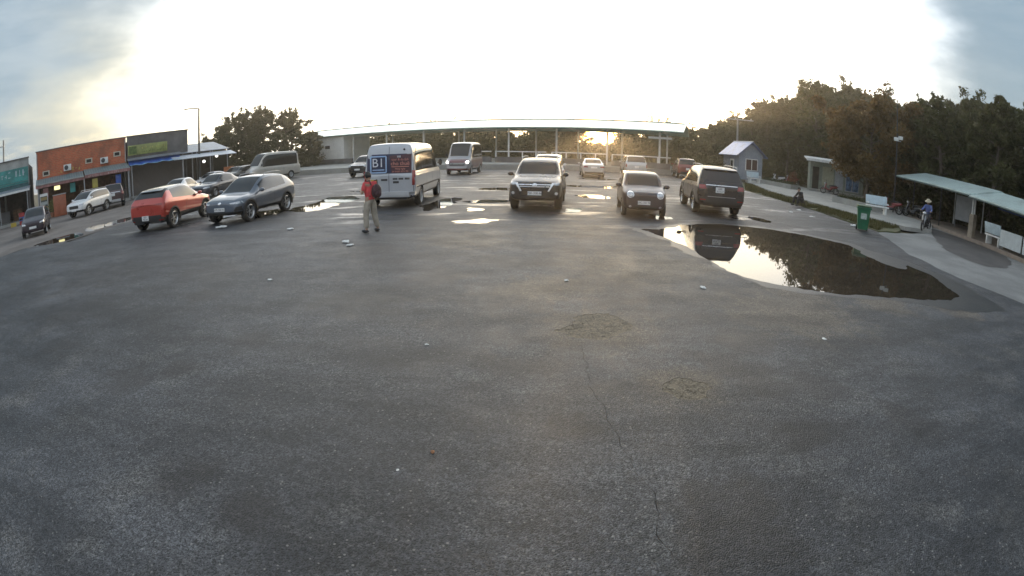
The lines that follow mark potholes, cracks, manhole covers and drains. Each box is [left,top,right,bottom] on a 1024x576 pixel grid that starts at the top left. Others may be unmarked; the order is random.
crack [583,352,672,555]
